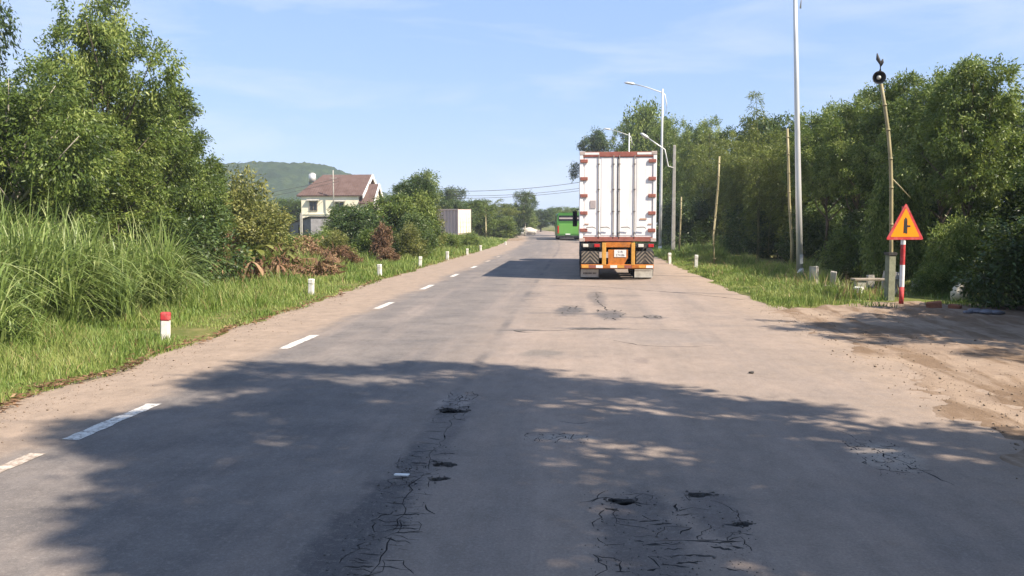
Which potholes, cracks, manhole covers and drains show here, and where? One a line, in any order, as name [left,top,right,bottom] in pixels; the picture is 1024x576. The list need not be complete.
pothole [686,490,719,498]
crack [840,431,954,485]
crack [339,393,478,576]
crack [586,491,752,576]
crack [506,284,743,333]
